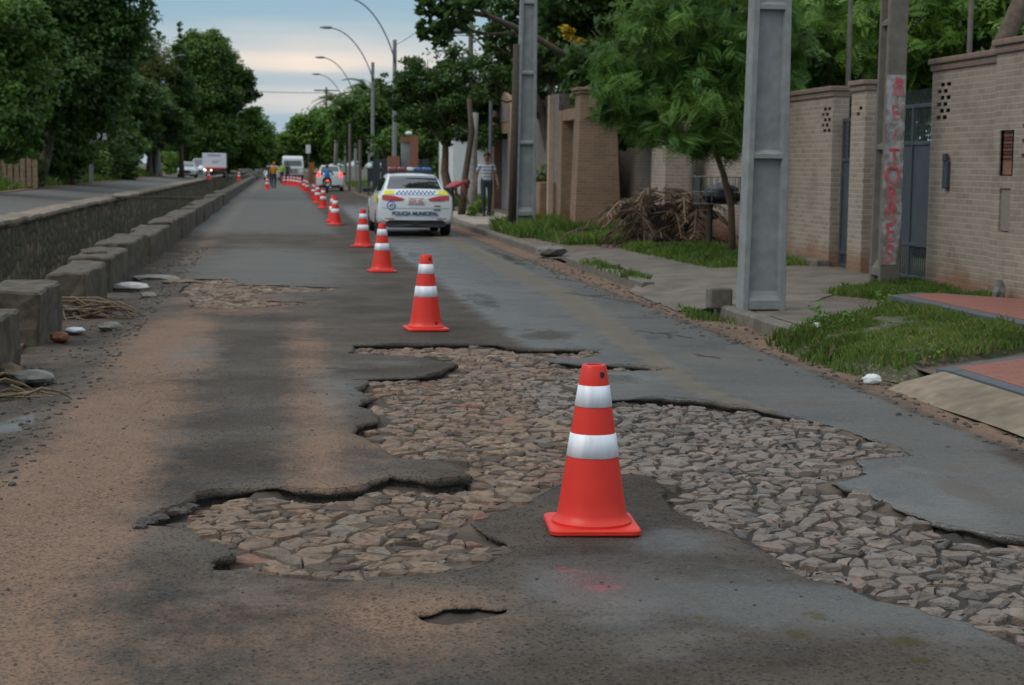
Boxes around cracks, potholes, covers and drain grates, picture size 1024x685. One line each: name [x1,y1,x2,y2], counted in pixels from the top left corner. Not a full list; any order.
pothole [178,278,343,309]
pothole [136,343,1024,648]
